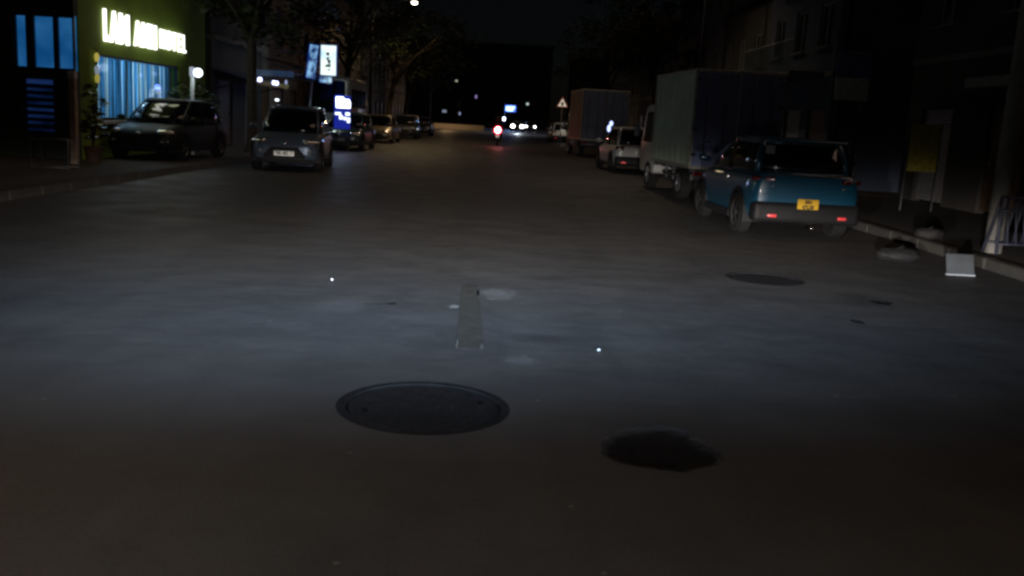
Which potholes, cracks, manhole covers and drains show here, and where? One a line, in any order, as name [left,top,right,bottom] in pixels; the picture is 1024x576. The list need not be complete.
manhole cover [336,381,510,435]
pothole [600,426,724,472]
